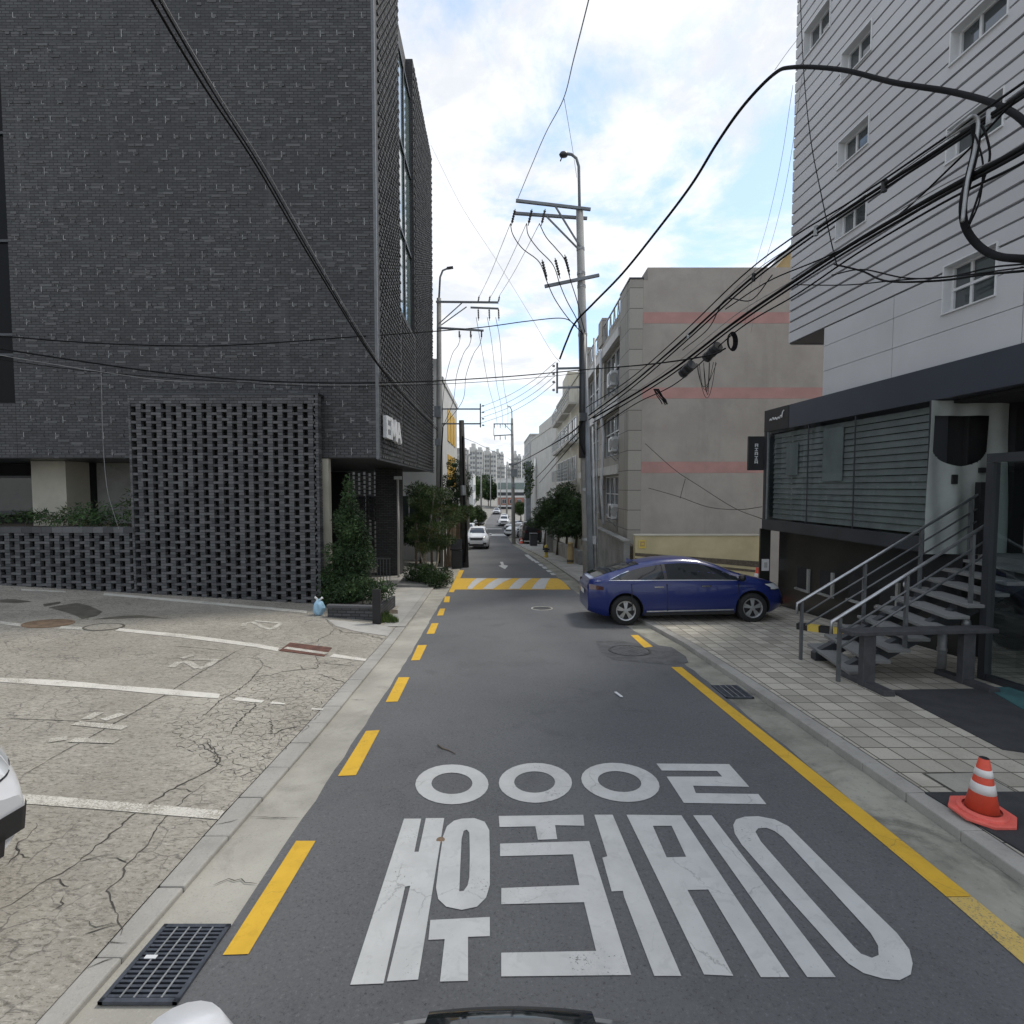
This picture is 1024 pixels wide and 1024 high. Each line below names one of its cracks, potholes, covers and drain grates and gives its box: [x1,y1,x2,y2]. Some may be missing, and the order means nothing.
crack [2,621,378,934]
drain grate [97,924,231,1005]
manhole cover [20,619,75,628]
manhole cover [279,642,332,657]
manhole cover [608,645,651,656]
manhole cover [82,623,125,631]
drain grate [711,685,754,699]
